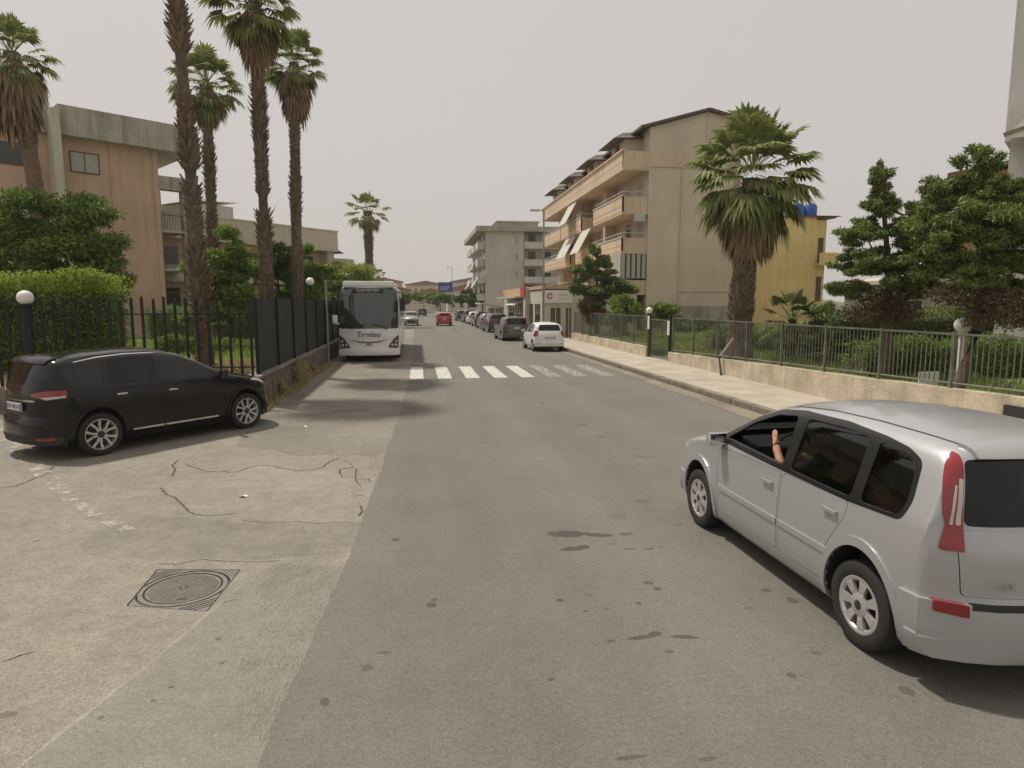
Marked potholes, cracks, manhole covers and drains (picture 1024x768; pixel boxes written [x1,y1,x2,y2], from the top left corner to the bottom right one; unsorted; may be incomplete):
manhole cover [127,569,240,611]
crack [160,446,371,516]
crack [3,466,55,488]
